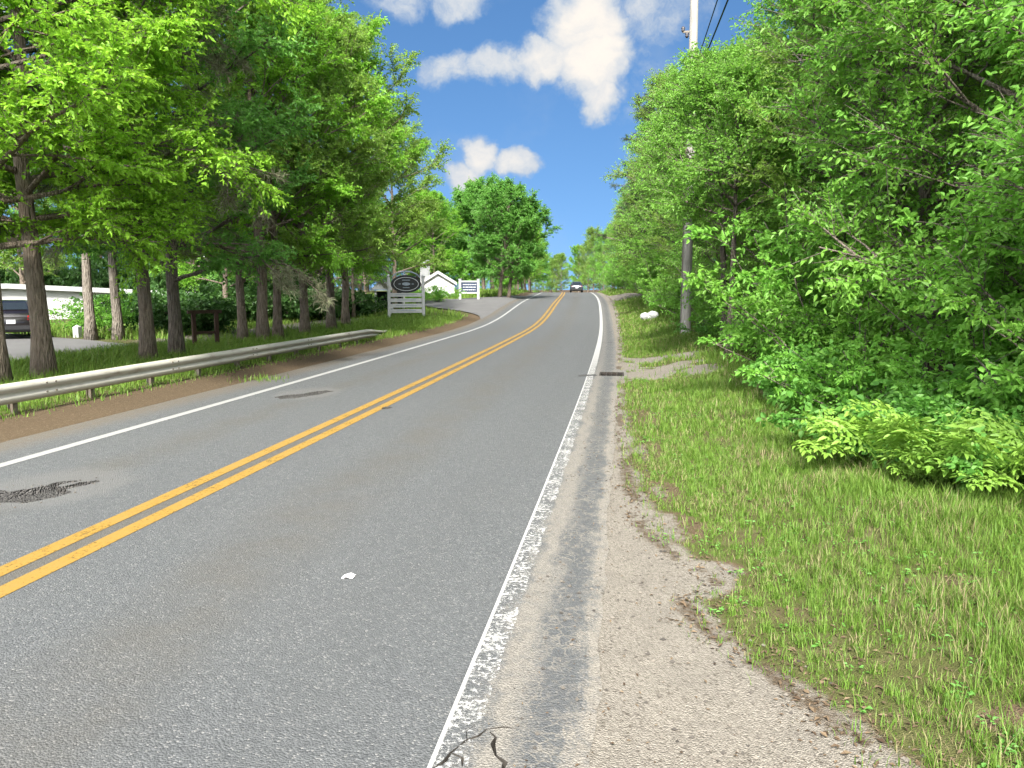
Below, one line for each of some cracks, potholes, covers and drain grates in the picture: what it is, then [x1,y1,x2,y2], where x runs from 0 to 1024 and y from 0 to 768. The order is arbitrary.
pothole [0,480,100,503]
crack [434,726,516,768]
